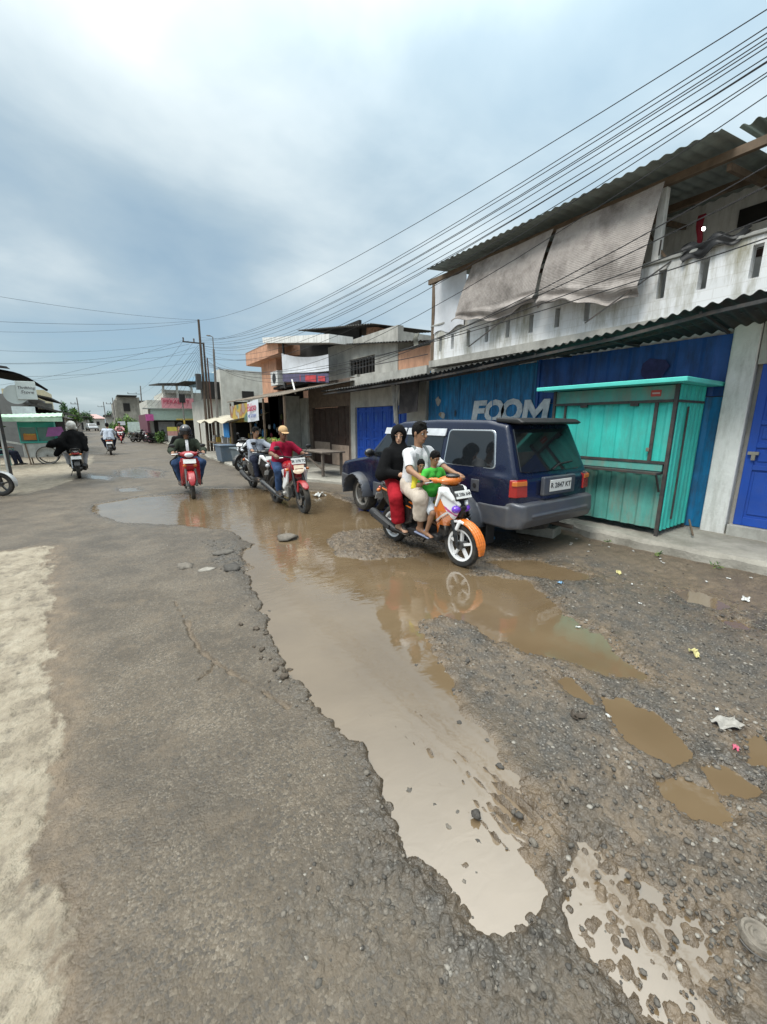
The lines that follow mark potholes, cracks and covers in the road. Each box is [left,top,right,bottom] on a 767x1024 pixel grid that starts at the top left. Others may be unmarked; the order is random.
crack [171,600,295,711]
pothole [585,685,718,781]
pothole [88,487,675,974]
pothole [637,764,757,841]
pothole [550,819,763,1024]
pothole [666,586,742,613]
pothole [113,467,166,478]
